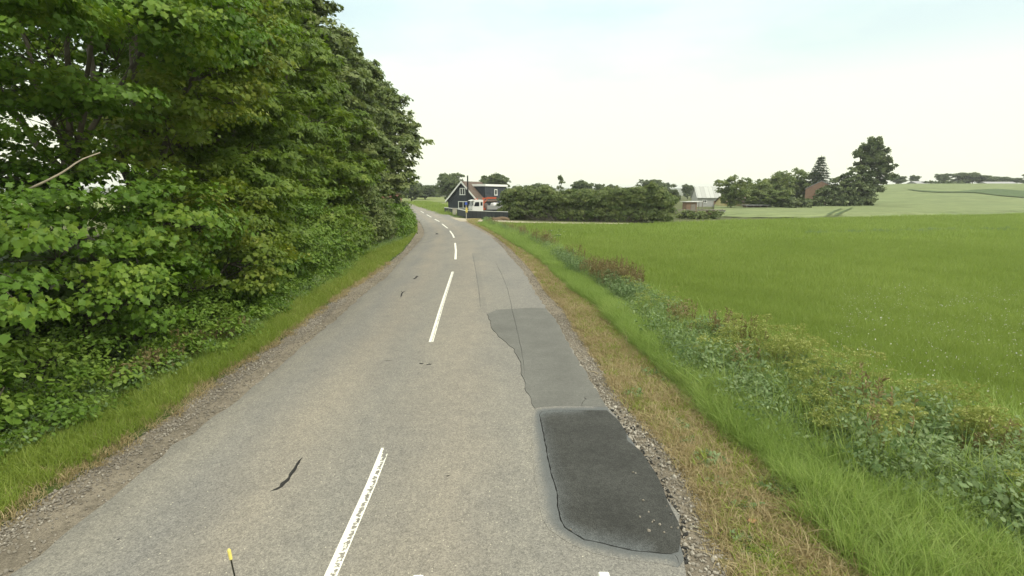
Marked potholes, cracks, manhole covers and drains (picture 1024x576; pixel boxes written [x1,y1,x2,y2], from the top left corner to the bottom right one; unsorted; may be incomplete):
crack [271,458,302,491]
